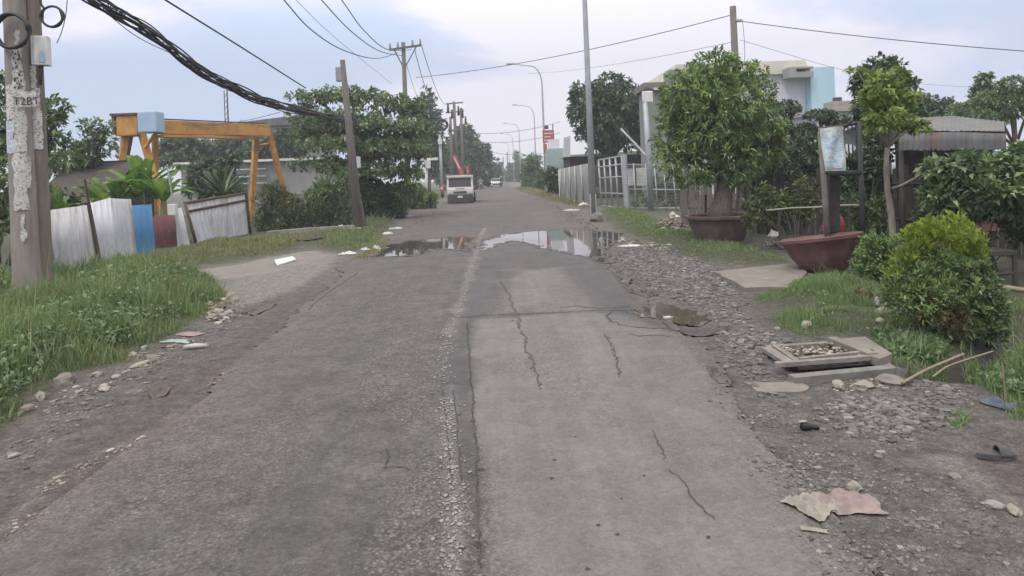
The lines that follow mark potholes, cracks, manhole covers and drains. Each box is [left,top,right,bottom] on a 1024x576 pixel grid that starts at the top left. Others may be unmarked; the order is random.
crack [457,281,674,387]
crack [652,430,715,520]
pothole [476,228,633,264]
pothole [628,304,712,327]
manhole cover [761,336,897,384]
pothole [363,235,481,258]
